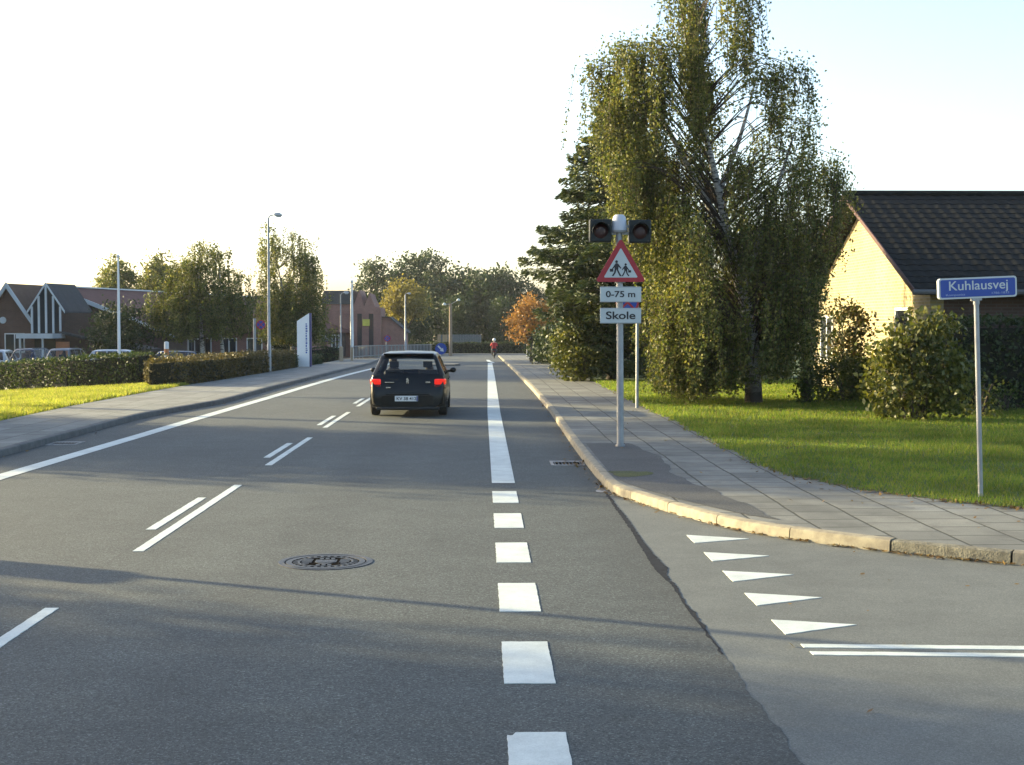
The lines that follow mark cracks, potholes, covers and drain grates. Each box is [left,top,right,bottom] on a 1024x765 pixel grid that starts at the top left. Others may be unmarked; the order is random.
manhole cover [278,554,373,570]
